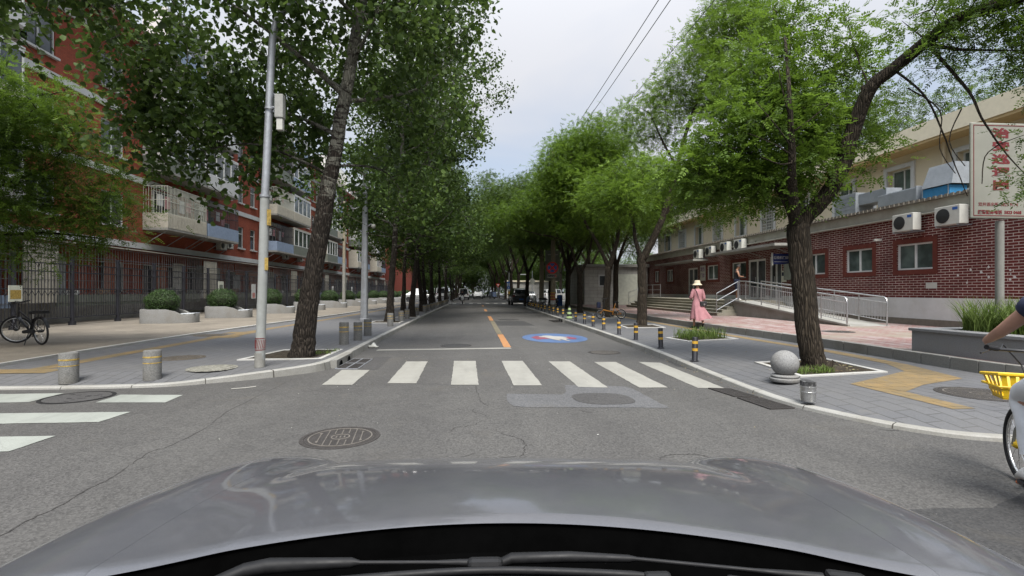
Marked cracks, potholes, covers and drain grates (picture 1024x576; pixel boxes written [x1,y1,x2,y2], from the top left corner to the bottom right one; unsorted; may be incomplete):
drain grate [330,352,353,368]
drain grate [335,358,373,369]
drain grate [708,388,758,398]
manhole cover [185,364,238,372]
manhole cover [36,391,117,404]
drain grate [737,397,795,410]
manhole cover [299,427,380,449]
manhole cover [933,387,1009,402]
